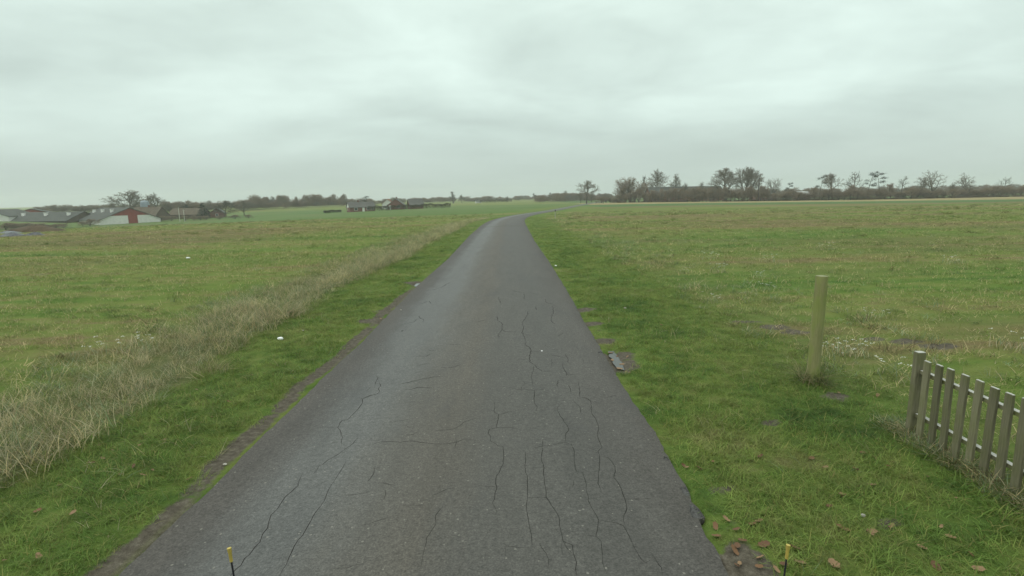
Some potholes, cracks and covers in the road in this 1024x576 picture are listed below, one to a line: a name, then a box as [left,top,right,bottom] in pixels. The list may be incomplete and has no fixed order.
crack [378,291,650,575]
crack [231,378,396,575]
